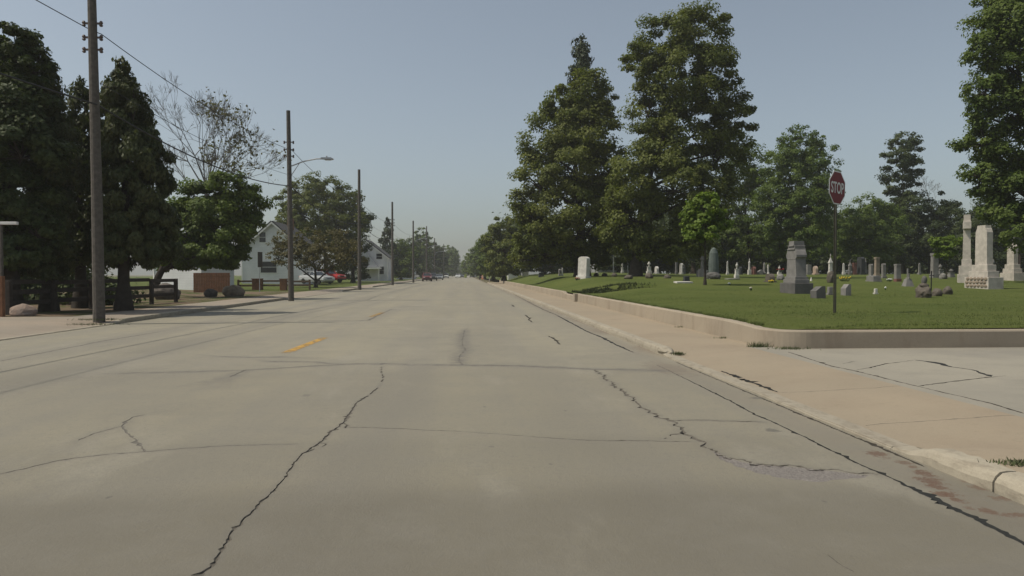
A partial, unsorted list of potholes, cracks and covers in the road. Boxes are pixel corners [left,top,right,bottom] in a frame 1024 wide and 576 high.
crack [512,299,632,352]
crack [1,331,894,576]
